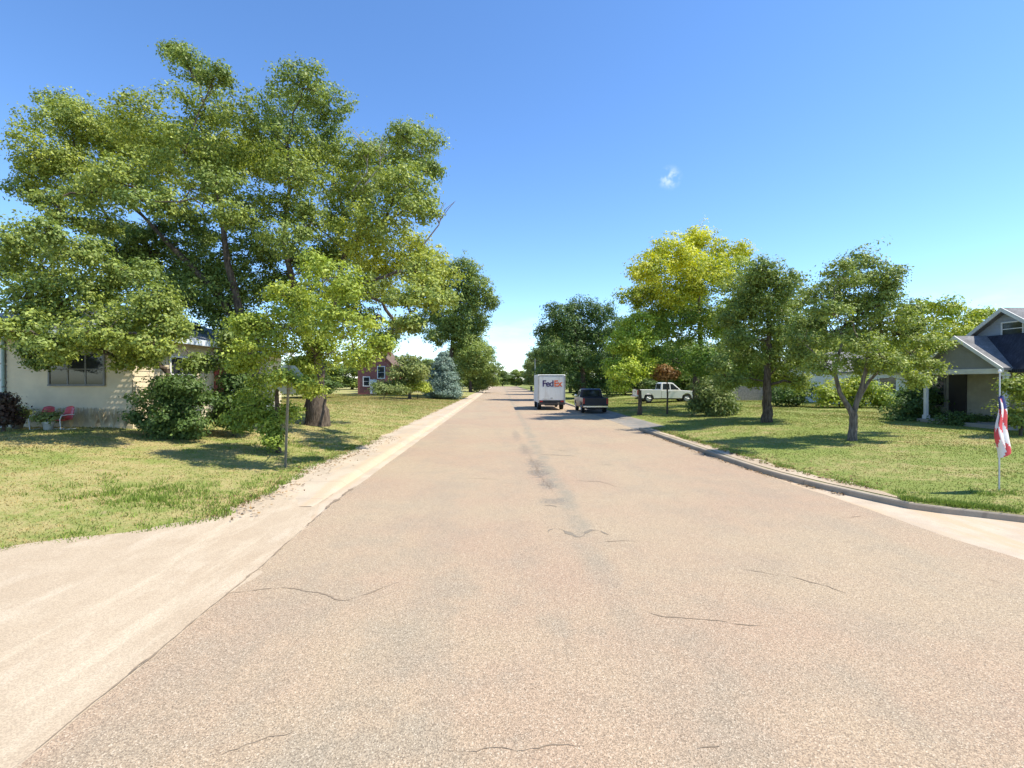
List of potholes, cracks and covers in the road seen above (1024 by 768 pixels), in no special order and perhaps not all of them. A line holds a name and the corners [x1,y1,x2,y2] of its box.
crack [548,529,626,542]
crack [229,582,397,600]
crack [650,612,760,626]
